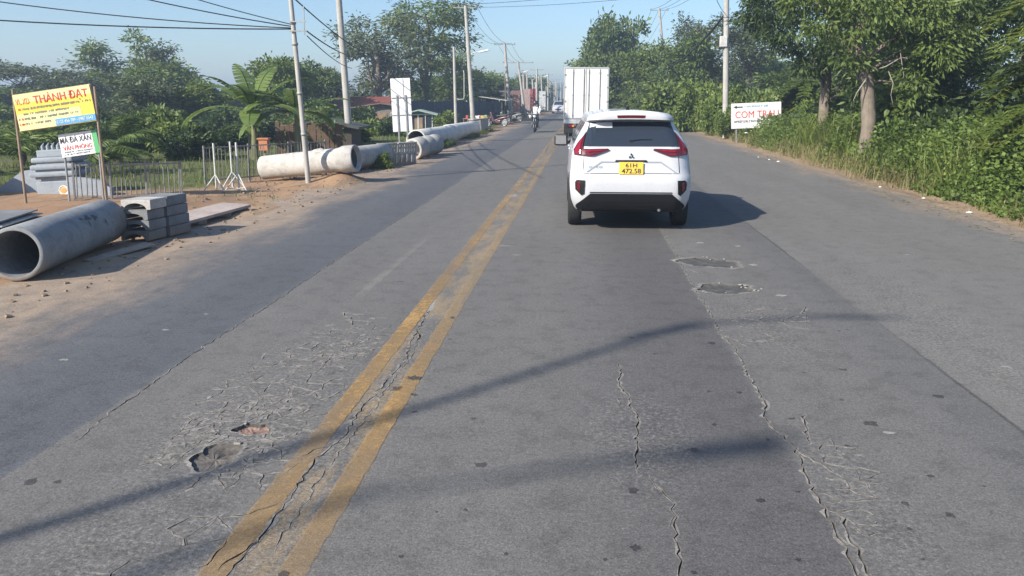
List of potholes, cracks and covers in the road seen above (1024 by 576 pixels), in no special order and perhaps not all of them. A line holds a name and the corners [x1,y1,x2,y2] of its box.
pothole [670,256,745,269]
pothole [184,441,248,474]
crack [76,180,461,576]
pothole [228,421,276,436]
crack [617,215,881,576]
pothole [690,282,763,295]
